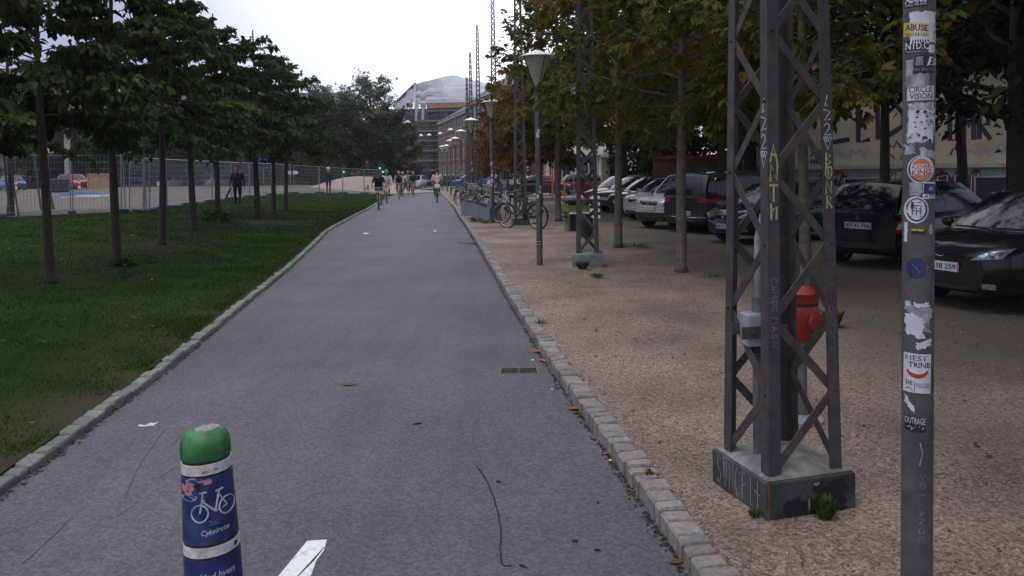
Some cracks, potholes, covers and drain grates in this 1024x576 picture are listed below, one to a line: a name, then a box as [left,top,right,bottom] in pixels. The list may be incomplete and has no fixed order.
crack [23,515,73,563]
crack [118,431,183,516]
crack [476,465,512,566]
